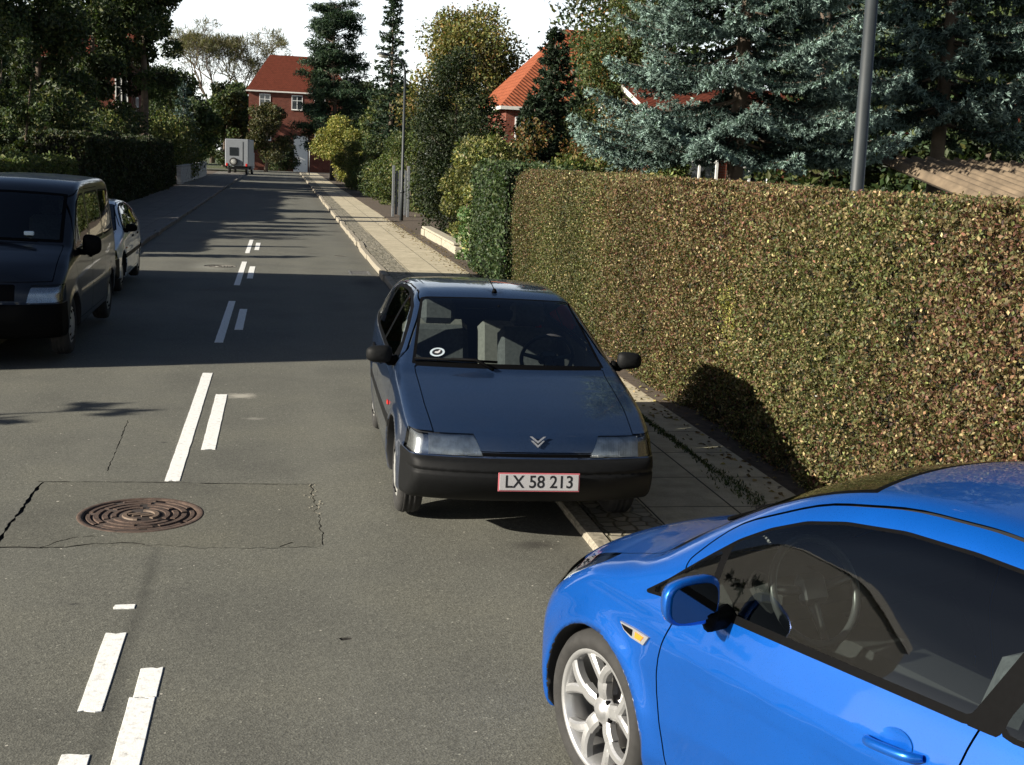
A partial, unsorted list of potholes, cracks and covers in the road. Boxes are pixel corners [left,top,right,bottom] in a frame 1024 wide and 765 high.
crack [0,481,324,549]
manhole cover [76,498,204,533]
